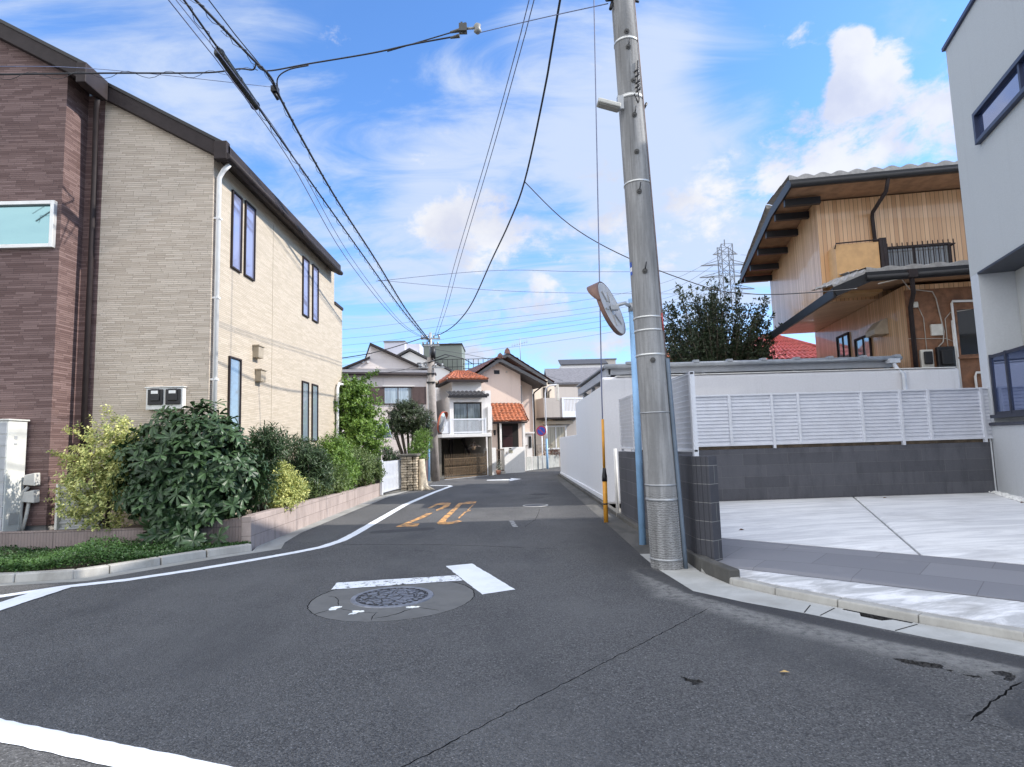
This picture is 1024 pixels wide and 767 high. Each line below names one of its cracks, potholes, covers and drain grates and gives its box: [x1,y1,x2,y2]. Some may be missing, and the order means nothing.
pothole [893,658,943,669]
crack [957,682,1022,731]
pothole [991,671,1016,682]
manhole cover [350,586,434,608]
